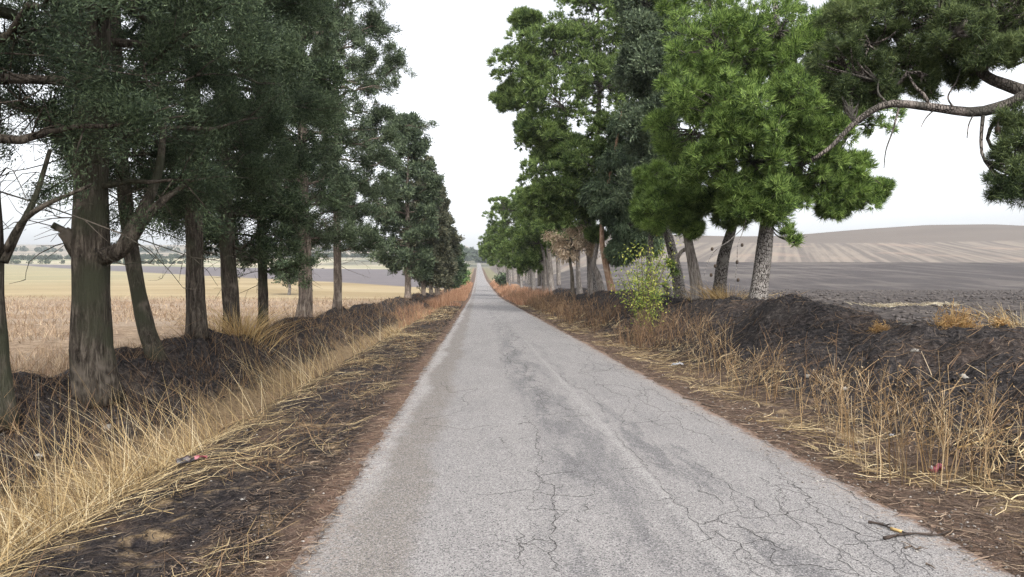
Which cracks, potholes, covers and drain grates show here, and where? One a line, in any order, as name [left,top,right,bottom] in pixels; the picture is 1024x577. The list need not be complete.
crack [484,324,930,577]
